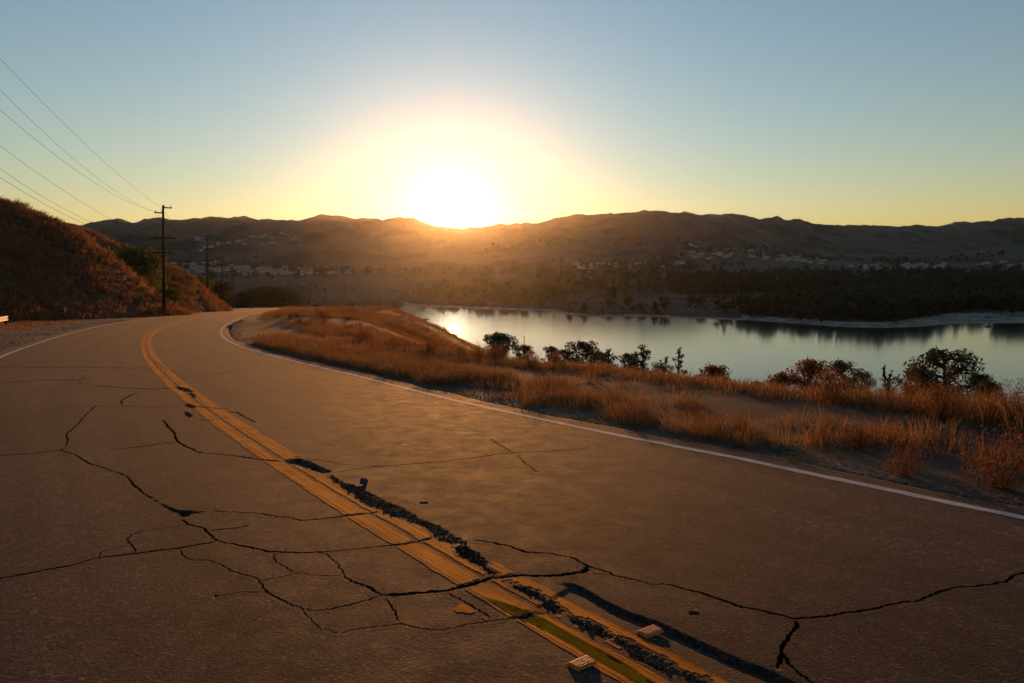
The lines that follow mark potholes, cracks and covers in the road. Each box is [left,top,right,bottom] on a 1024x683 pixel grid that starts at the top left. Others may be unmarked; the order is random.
pothole [556,611,716,683]
pothole [451,544,503,579]
pothole [326,473,476,548]
crack [0,354,1024,683]
pothole [501,579,572,617]
